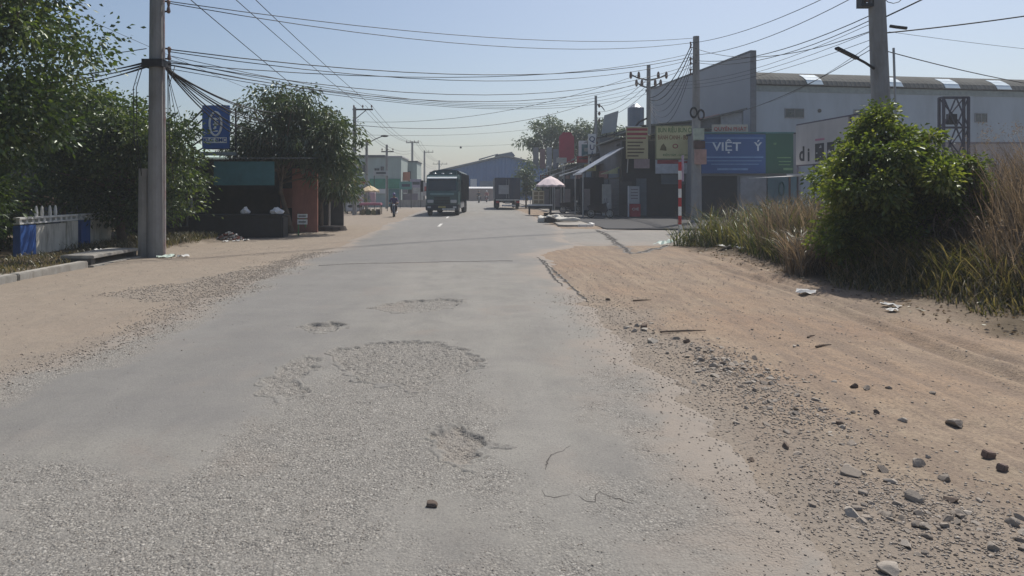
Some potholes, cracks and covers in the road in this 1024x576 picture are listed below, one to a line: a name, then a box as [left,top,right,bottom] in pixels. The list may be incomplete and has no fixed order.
pothole [296,320,352,334]
crack [537,230,668,302]
pothole [366,297,468,314]
pothole [420,421,517,474]
pothole [324,339,490,393]
crack [542,491,629,503]
